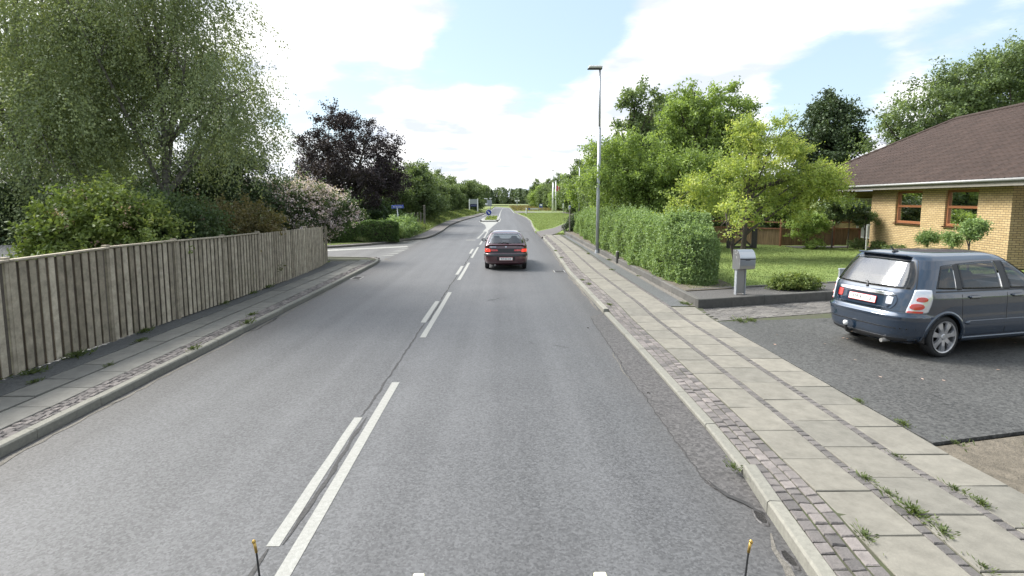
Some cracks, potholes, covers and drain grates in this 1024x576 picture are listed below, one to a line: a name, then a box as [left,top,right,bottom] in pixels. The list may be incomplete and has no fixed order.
crack [543,240,764,514]
